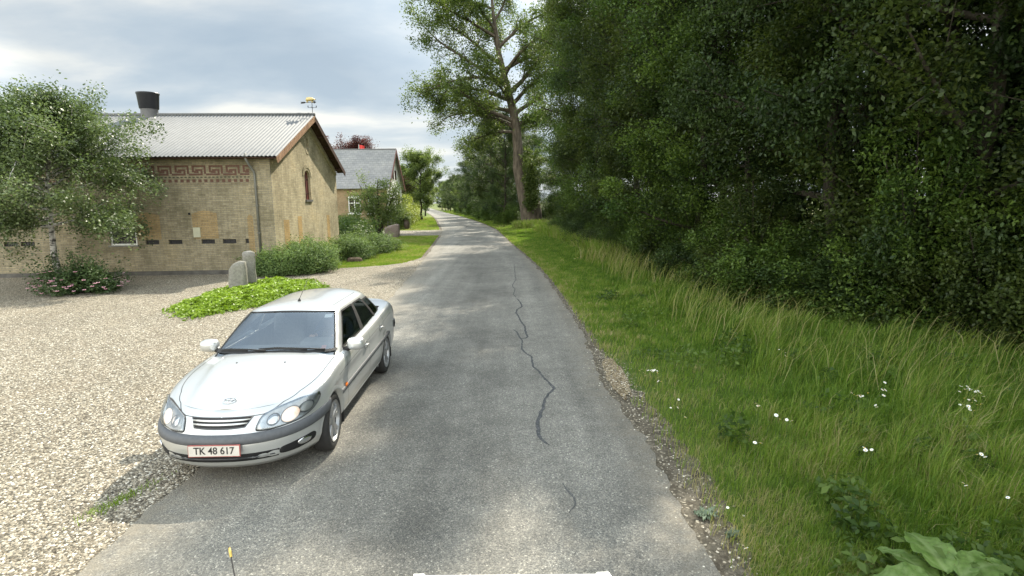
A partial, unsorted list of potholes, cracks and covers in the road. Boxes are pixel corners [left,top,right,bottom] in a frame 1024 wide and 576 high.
crack [563,483,576,513]
